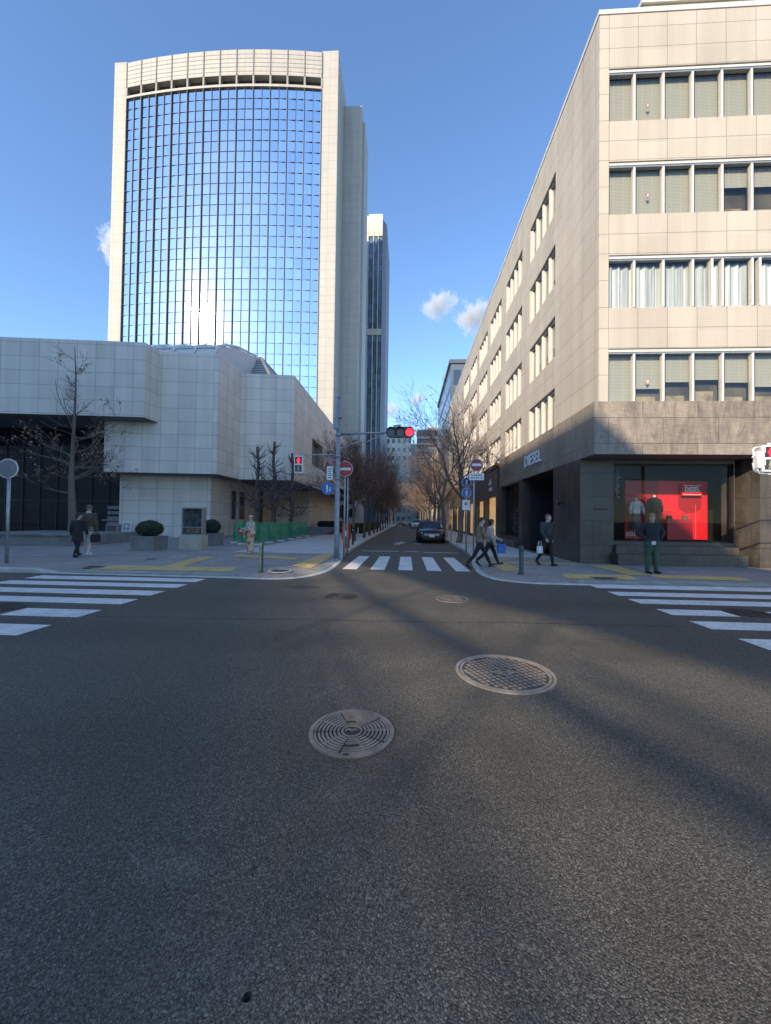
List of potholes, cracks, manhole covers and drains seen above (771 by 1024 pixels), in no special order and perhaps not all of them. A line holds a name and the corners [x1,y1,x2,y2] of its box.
manhole cover [309,709,394,759]
manhole cover [456,655,557,695]
manhole cover [435,595,469,603]
